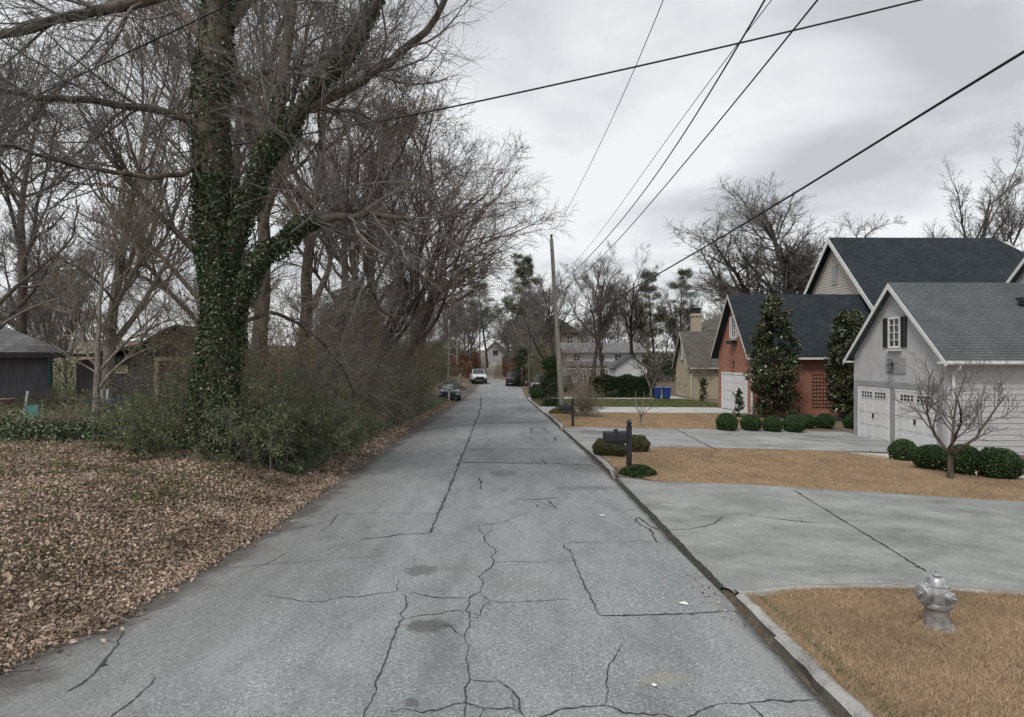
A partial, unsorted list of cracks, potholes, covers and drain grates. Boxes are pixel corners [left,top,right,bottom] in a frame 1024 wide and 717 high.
crack [66,631,156,717]
crack [261,513,565,717]
crack [274,395,724,616]
